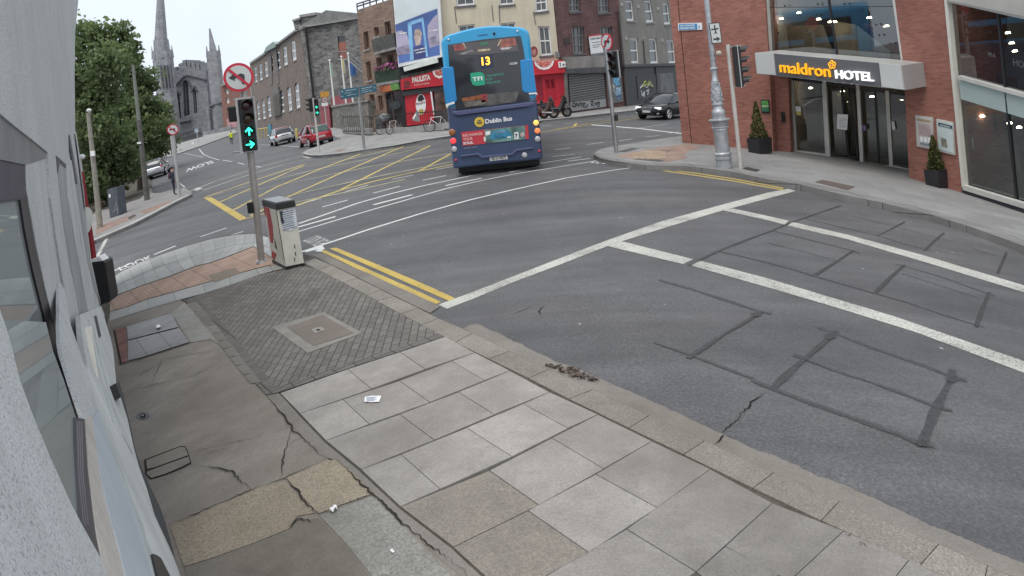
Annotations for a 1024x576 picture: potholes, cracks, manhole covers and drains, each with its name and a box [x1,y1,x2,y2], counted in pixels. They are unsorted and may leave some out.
crack [203,465,251,490]
manhole cover [272,312,362,353]
crack [716,393,764,443]
utility cover [144,446,191,479]
utility cover [114,312,189,364]
